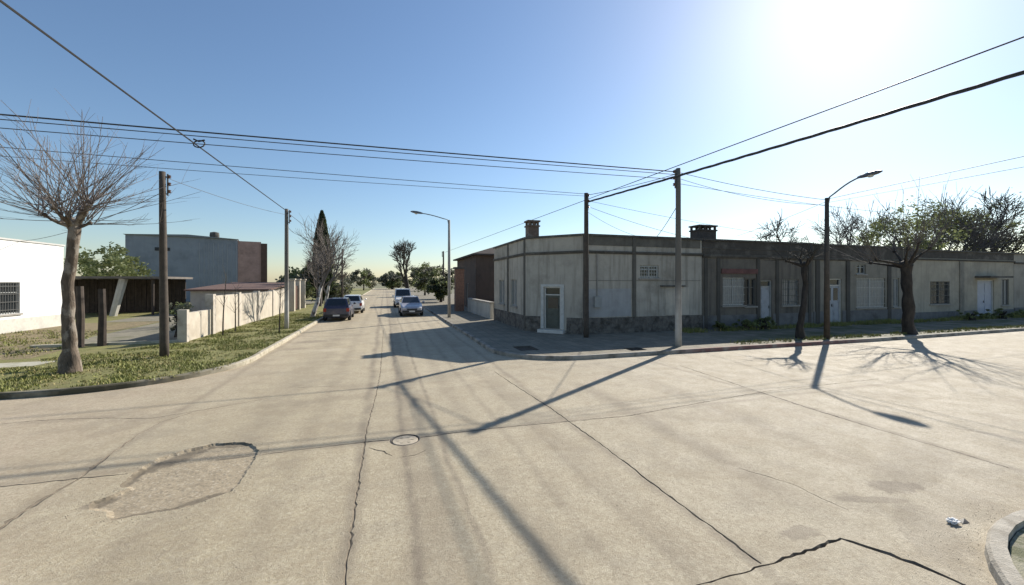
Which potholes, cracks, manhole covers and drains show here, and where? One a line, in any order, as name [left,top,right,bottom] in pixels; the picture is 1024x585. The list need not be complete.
crack [0,412,192,530]
manhole cover [390,434,420,446]
crack [697,538,965,585]
